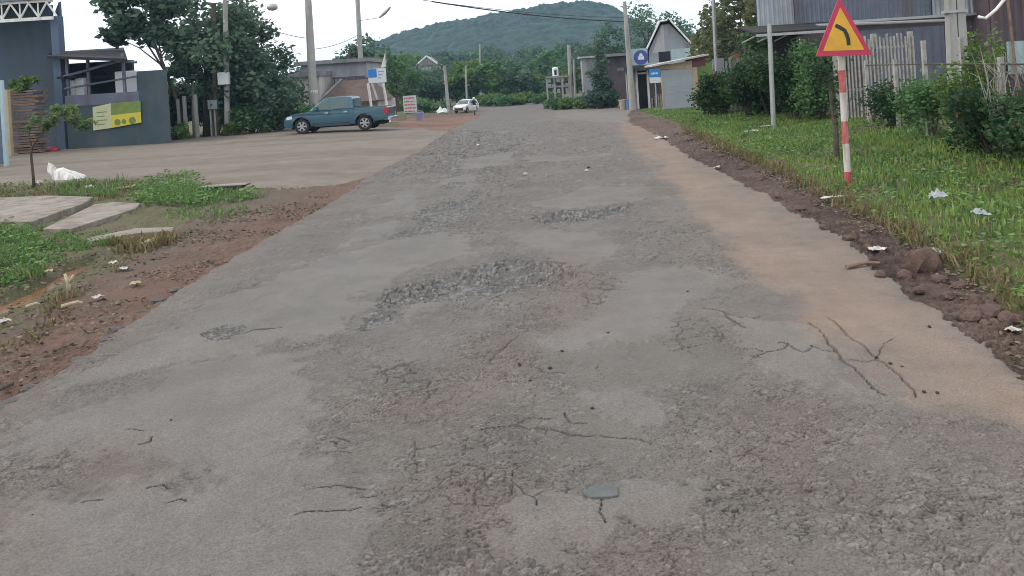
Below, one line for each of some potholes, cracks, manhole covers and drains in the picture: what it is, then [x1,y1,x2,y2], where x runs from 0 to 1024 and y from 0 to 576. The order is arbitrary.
pothole [200,323,247,342]
crack [147,484,187,503]
crack [325,403,360,453]
crack [480,412,653,445]
pothole [373,259,580,310]
crack [294,442,547,520]
crack [664,307,917,398]
pothole [531,204,631,224]
